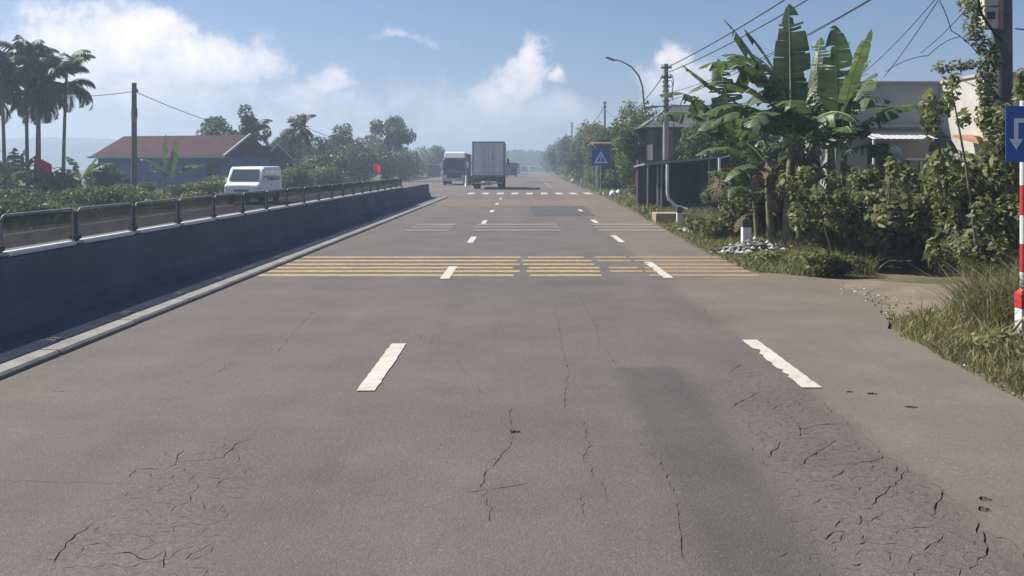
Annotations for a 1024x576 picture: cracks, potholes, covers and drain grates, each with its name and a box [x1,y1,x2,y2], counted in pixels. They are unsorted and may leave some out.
crack [730,364,1024,576]
crack [555,311,570,407]
crack [470,407,528,524]
crack [632,436,691,566]
crack [13,438,253,576]
crack [580,422,610,515]
